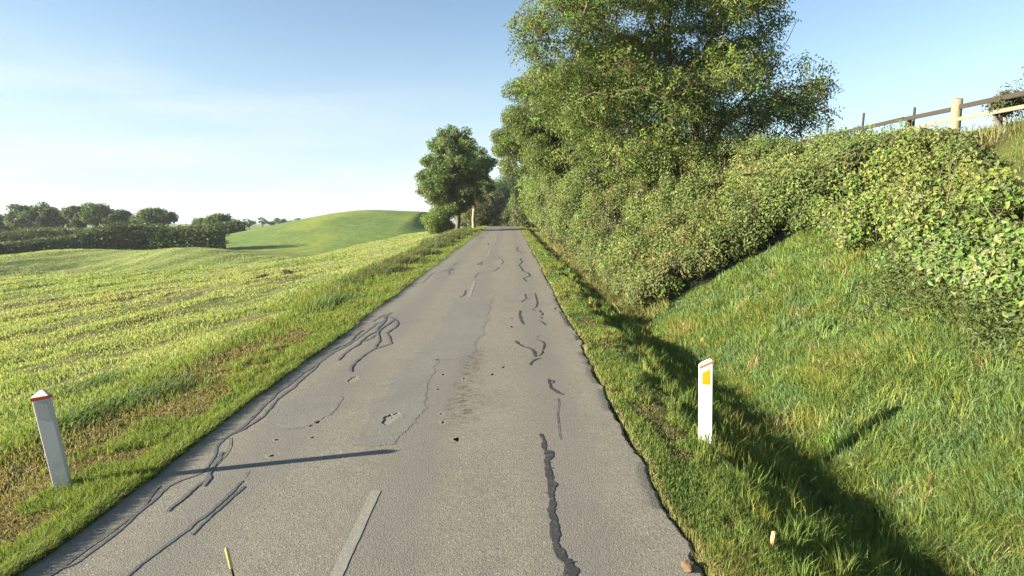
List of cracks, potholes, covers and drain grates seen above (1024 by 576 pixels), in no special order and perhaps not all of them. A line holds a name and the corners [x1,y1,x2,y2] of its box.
pothole [378,411,405,427]
